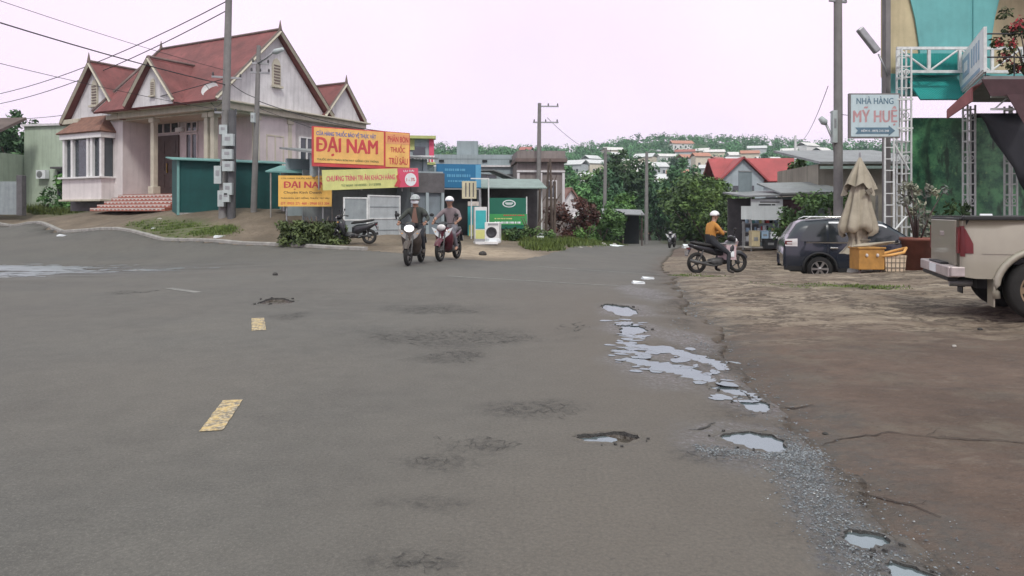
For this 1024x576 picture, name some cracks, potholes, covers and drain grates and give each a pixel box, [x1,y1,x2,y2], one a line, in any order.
crack [870,495,941,517]
pothole [730,396,780,414]
pothole [708,429,791,454]
pothole [869,555,941,576]
pothole [253,297,297,305]
crack [821,429,1015,446]
pothole [573,431,650,447]
pothole [615,323,654,335]
pothole [705,381,753,399]
pothole [831,528,906,553]
